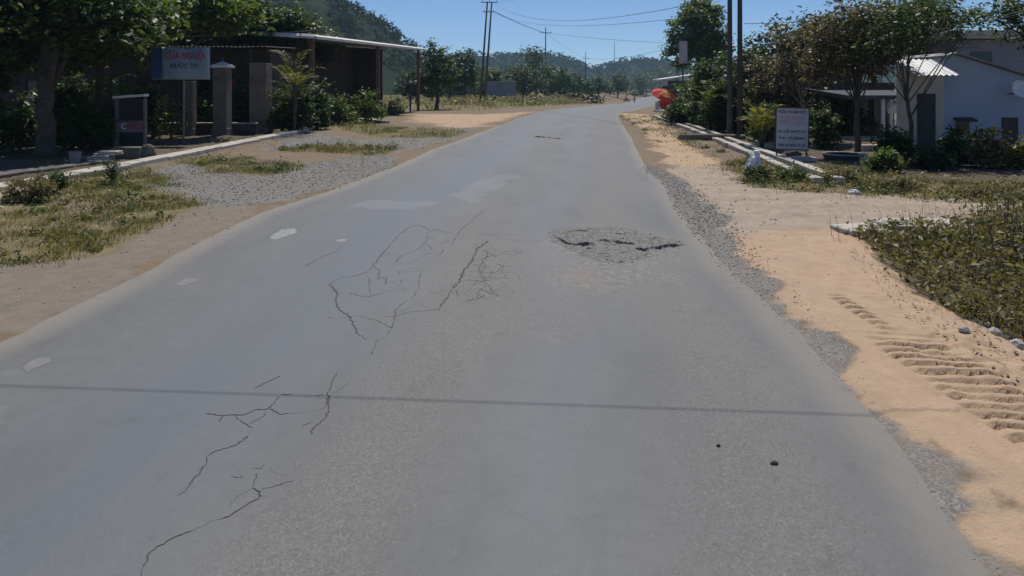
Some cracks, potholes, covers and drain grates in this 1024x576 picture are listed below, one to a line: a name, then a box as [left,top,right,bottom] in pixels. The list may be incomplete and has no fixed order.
crack [141,465,293,575]
pothole [548,226,687,266]
crack [329,211,537,354]
crack [181,373,342,494]
